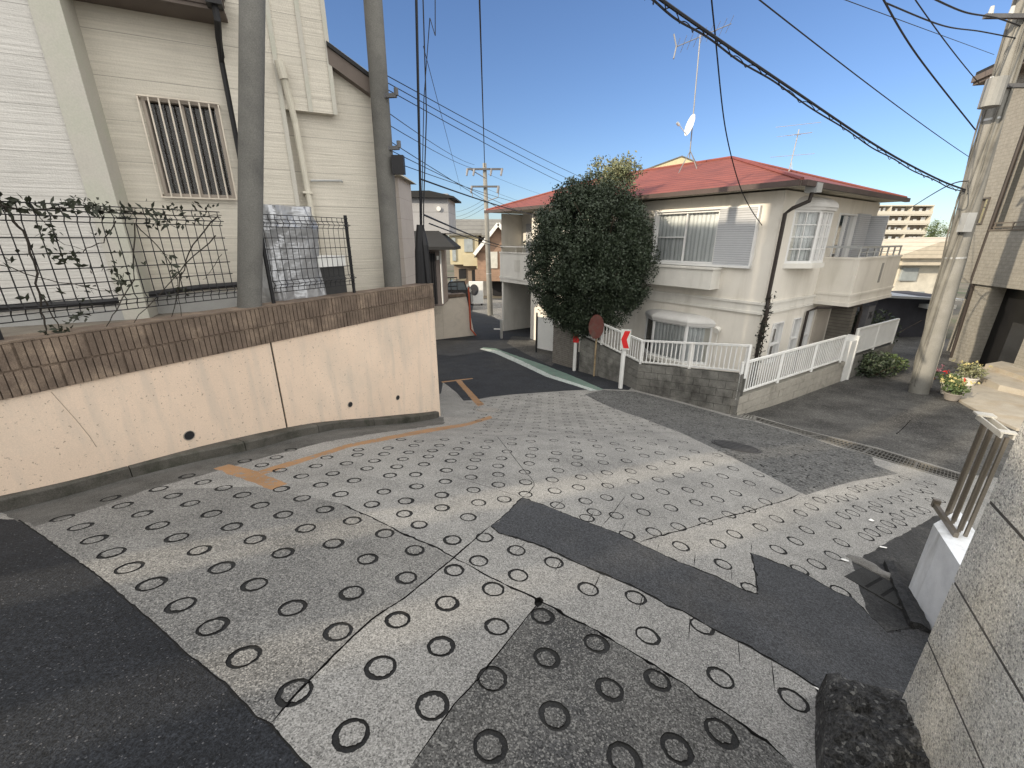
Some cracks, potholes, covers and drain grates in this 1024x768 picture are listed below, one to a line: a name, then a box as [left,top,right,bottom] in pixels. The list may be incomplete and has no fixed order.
crack [341,503,785,758]
crack [641,495,797,549]
drain grate [756,417,960,481]
manhole cover [711,440,761,454]
